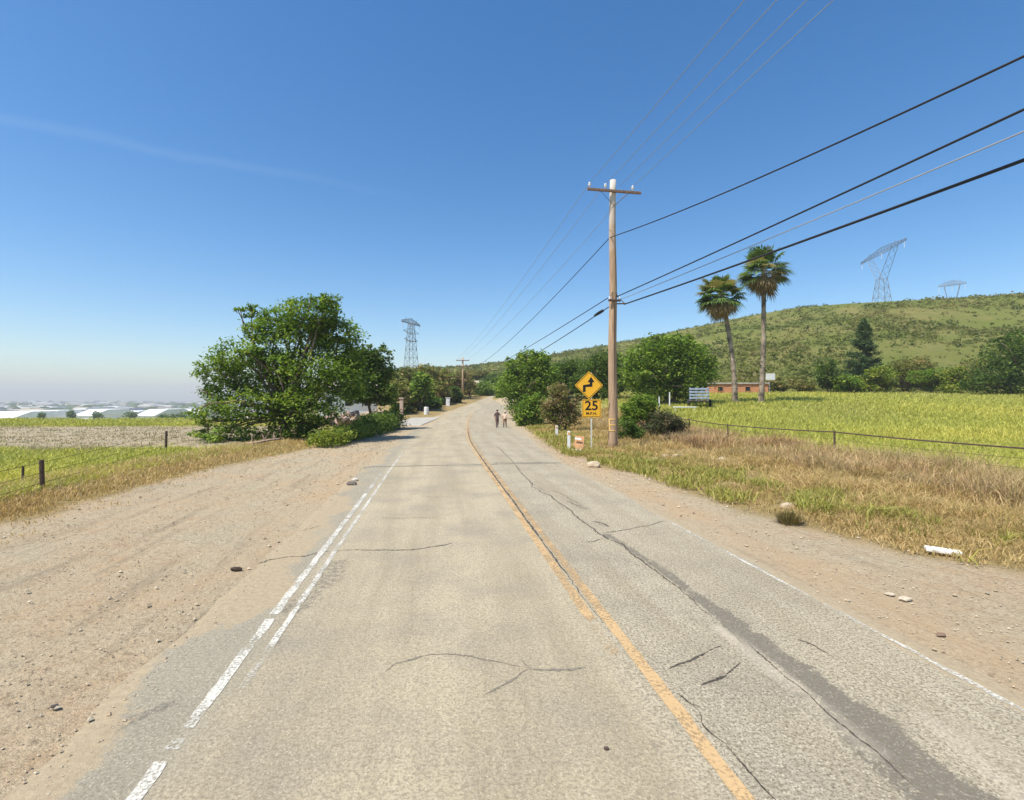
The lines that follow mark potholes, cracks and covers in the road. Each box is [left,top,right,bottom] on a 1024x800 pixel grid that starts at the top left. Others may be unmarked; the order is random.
crack [260,542,453,563]
crack [381,653,585,694]
crack [499,448,907,800]
